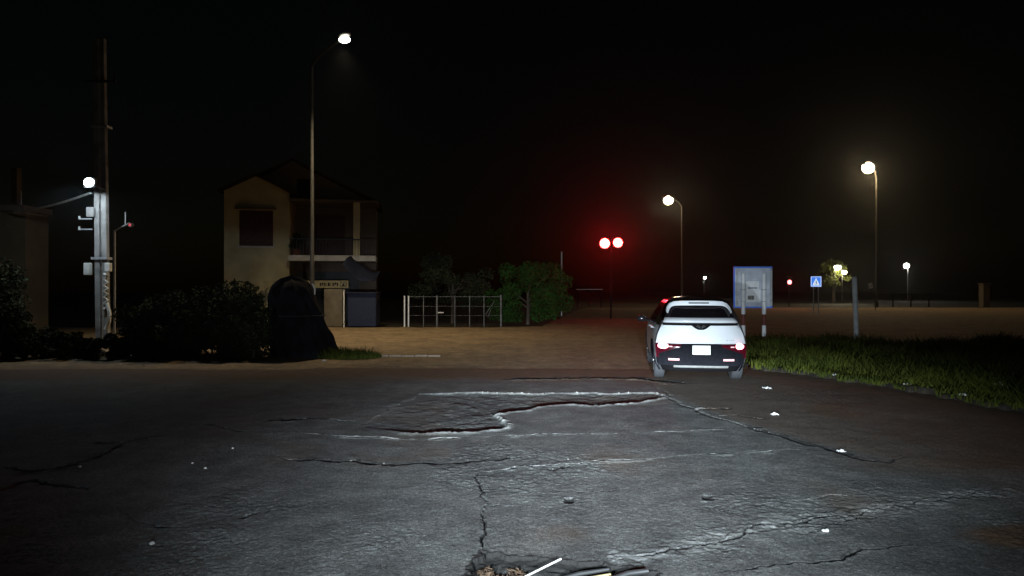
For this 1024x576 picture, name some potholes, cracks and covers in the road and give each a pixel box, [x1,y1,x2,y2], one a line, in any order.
crack [621,491,1008,573]
crack [0,433,179,492]
pothole [466,550,661,576]
crack [264,377,905,473]
pothole [361,391,664,433]
